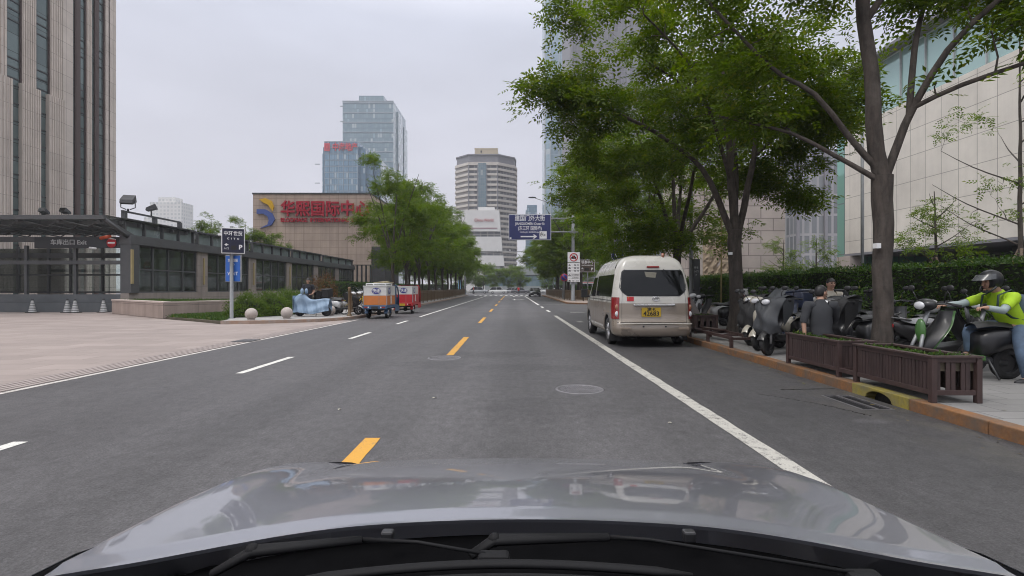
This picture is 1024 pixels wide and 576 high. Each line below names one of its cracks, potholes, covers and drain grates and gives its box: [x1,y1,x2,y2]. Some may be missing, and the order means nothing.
drain grate [821,395,896,410]
manhole cover [555,384,604,394]
